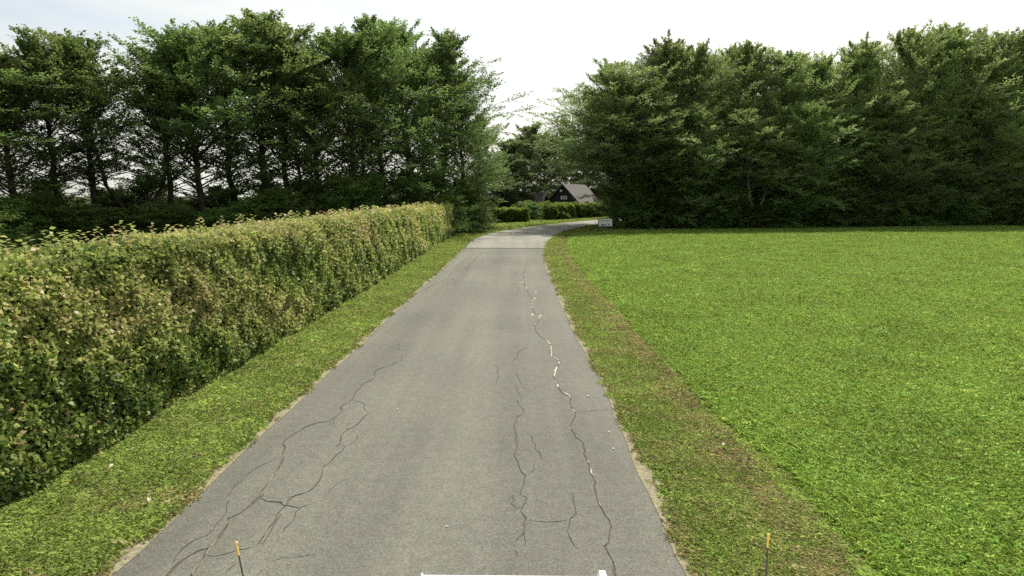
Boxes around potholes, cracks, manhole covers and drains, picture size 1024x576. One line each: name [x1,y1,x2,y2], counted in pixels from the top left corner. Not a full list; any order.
crack [166,343,403,576]
crack [497,260,616,576]
